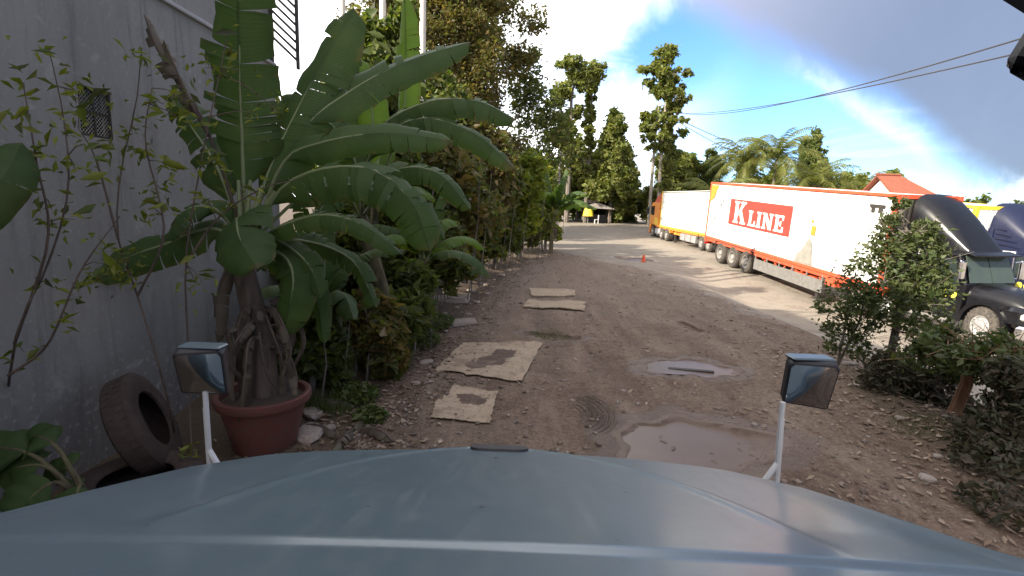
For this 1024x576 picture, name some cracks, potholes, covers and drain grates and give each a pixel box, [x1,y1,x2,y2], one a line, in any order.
pothole [675,321,707,333]
pothole [640,357,741,379]
pothole [611,413,795,473]
pothole [518,330,591,342]
